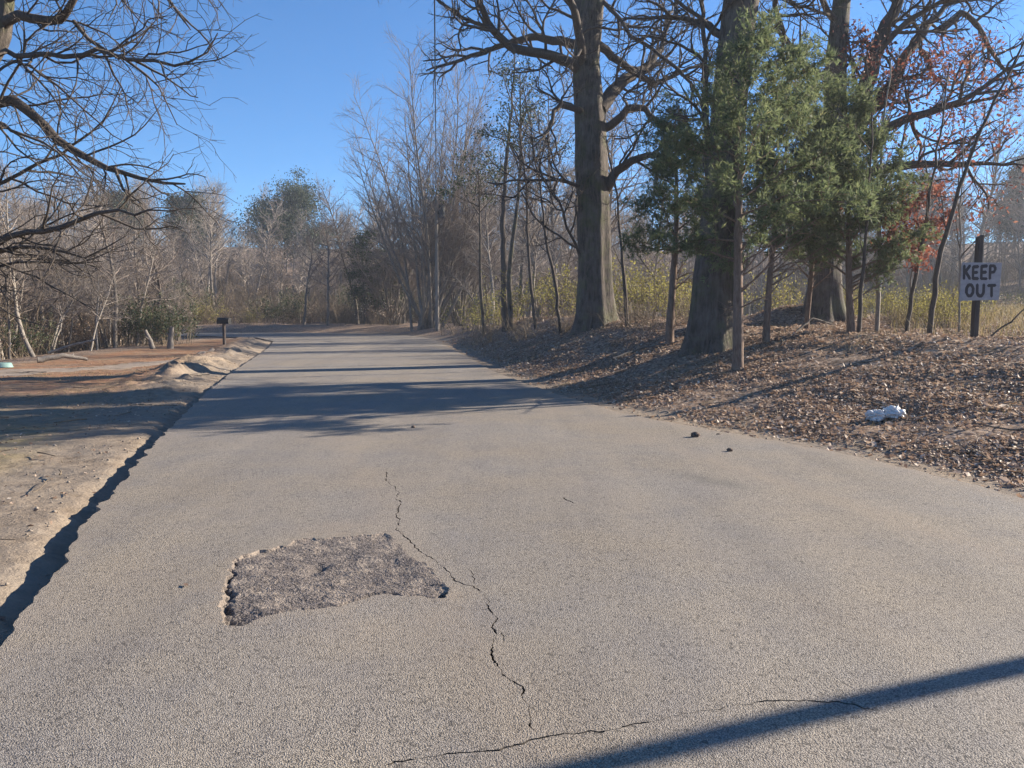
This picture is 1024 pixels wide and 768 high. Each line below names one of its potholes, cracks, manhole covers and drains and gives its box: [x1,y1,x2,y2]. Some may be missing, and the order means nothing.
crack [381,472,880,768]
pothole [217,533,450,626]
